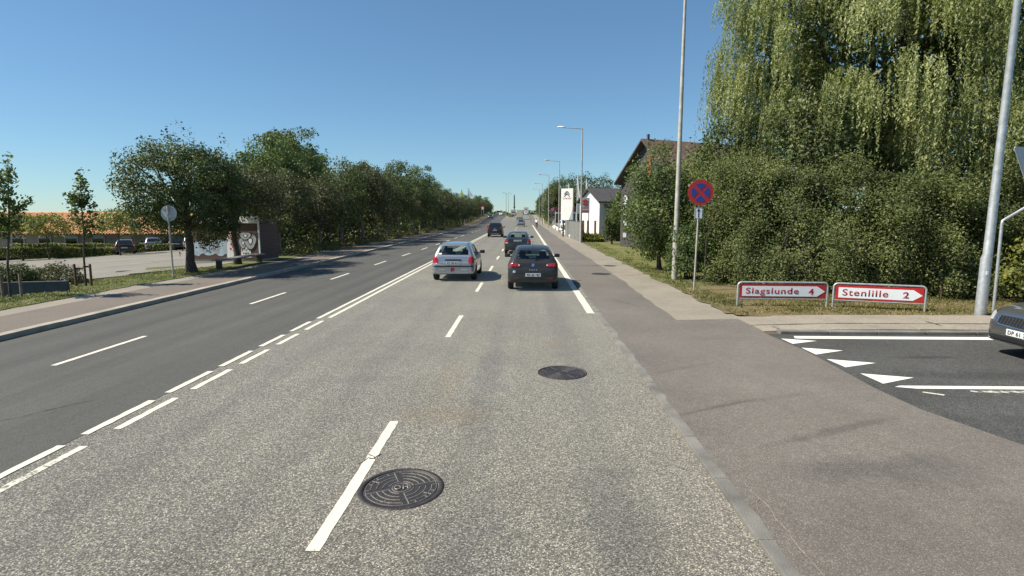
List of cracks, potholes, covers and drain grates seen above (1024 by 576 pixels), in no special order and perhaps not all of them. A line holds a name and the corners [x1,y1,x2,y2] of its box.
crack [736,466,824,575]
manhole cover [357,468,444,511]
manhole cover [538,366,587,380]
